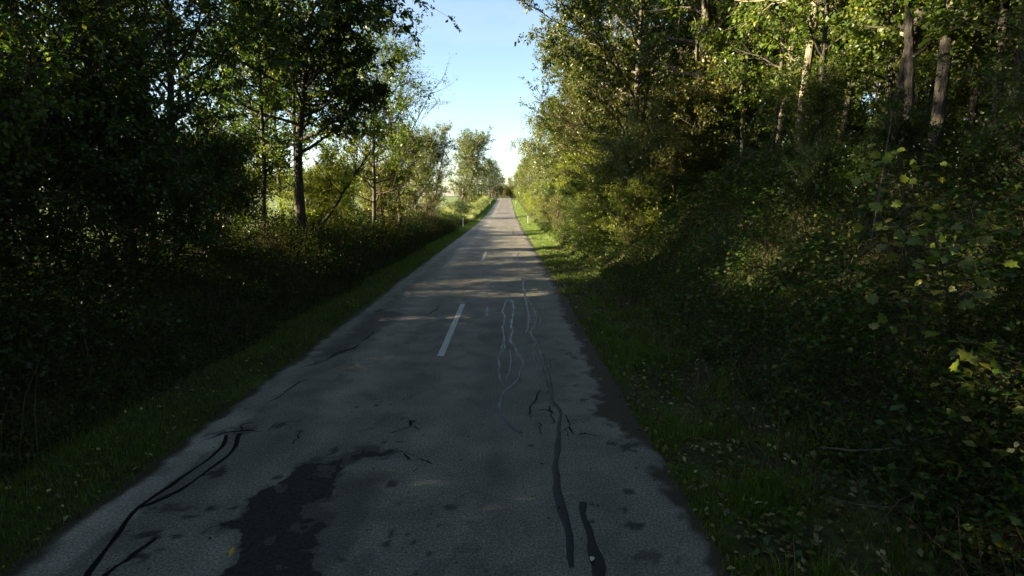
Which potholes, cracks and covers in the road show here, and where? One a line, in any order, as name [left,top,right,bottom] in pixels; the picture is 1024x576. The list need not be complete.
crack [267,331,374,403]
